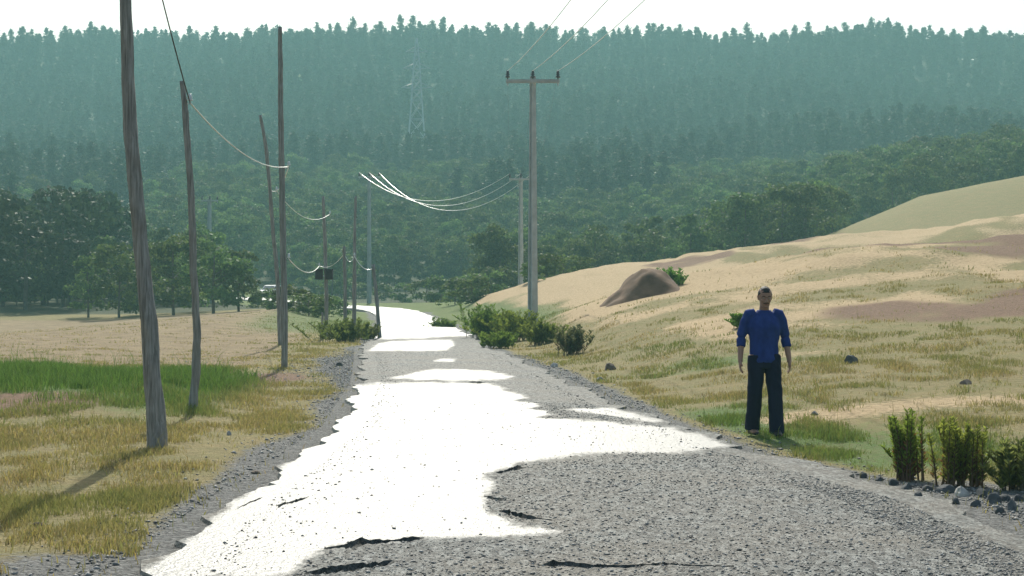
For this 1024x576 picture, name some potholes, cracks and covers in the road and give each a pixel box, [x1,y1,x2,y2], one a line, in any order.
crack [538,560,734,568]
